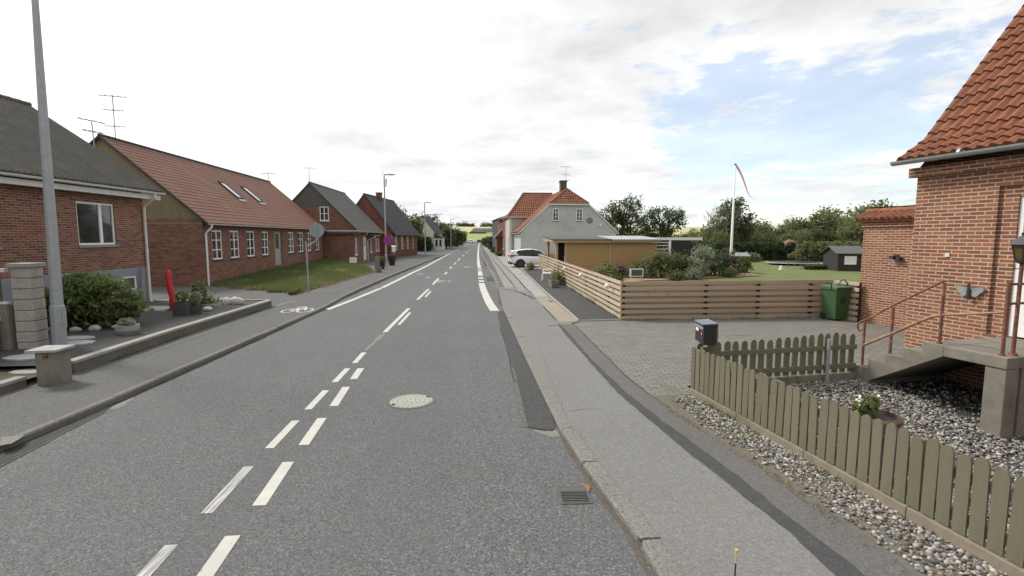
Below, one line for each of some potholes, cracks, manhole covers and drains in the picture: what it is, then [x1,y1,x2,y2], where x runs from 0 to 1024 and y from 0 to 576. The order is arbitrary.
drain grate [557,486,593,505]
manhole cover [387,393,435,409]
